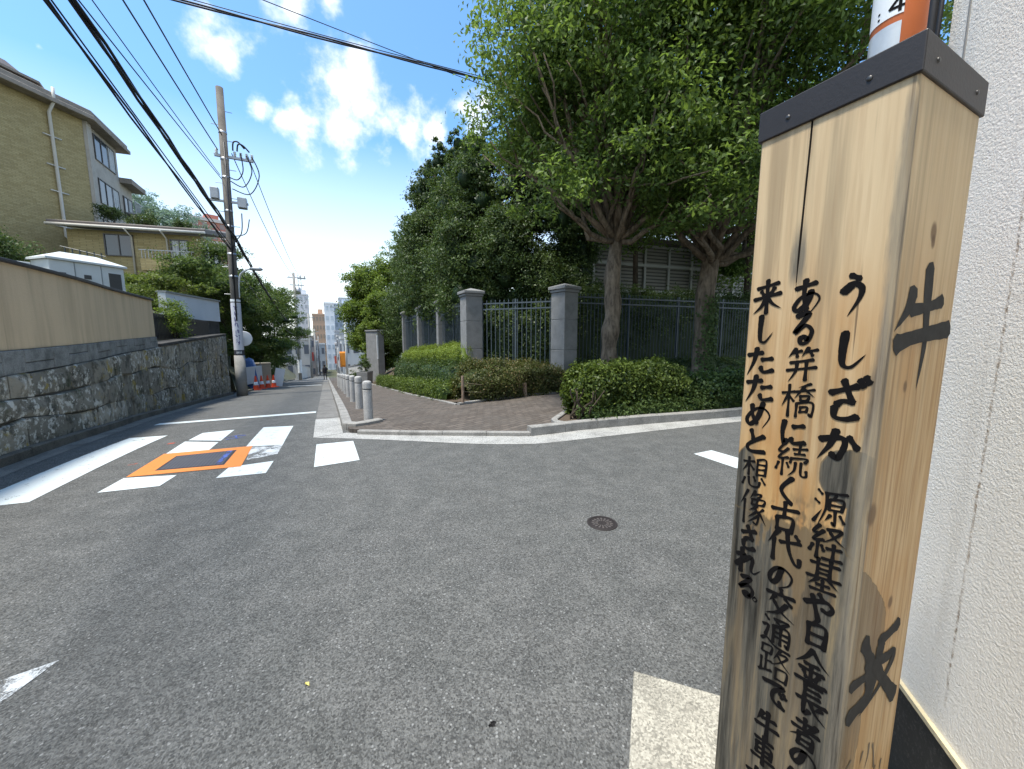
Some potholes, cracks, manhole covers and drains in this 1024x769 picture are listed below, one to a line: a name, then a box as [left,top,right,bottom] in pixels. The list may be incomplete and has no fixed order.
manhole cover [155,450,236,471]
manhole cover [587,516,618,531]
